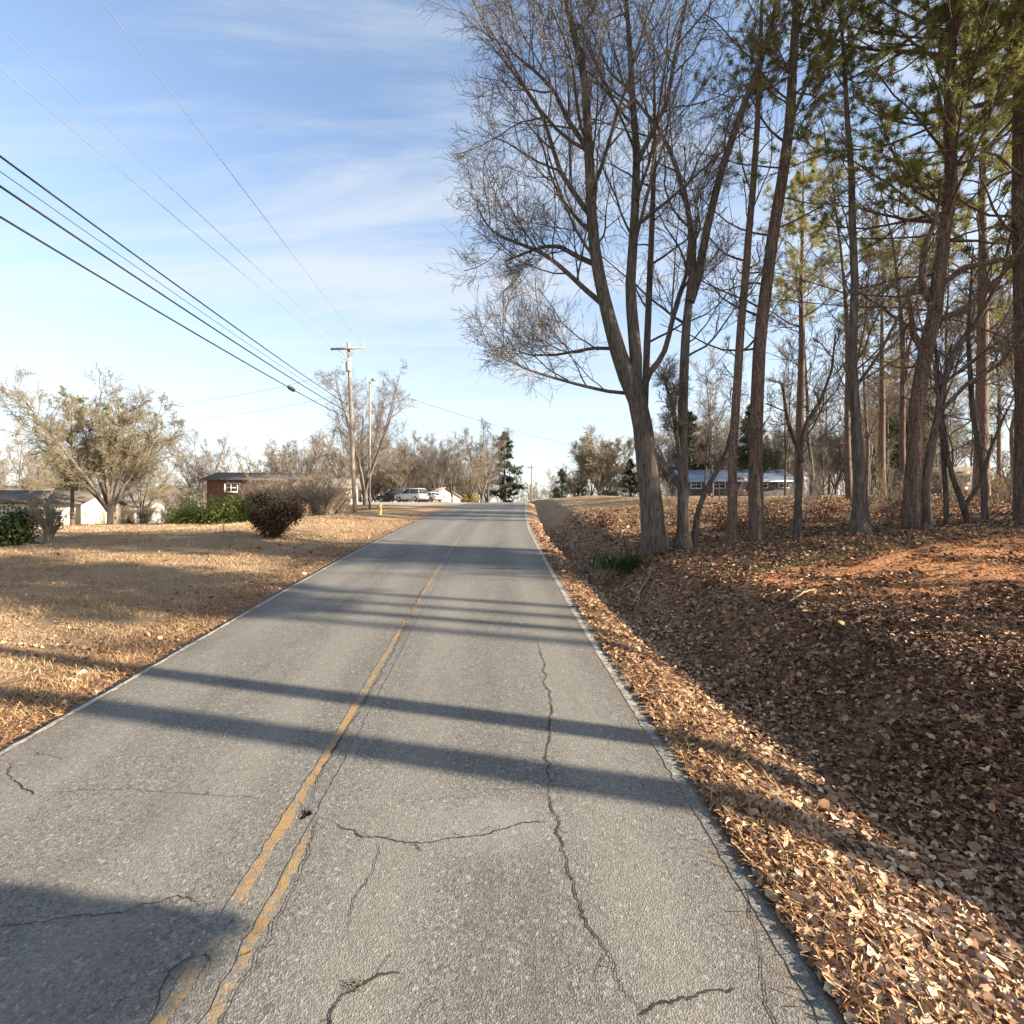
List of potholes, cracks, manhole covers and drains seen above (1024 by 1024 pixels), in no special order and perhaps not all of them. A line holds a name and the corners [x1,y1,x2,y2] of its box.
crack [219,584,735,1024]
crack [7,762,271,802]
crack [0,892,221,927]
crack [135,952,215,1024]
